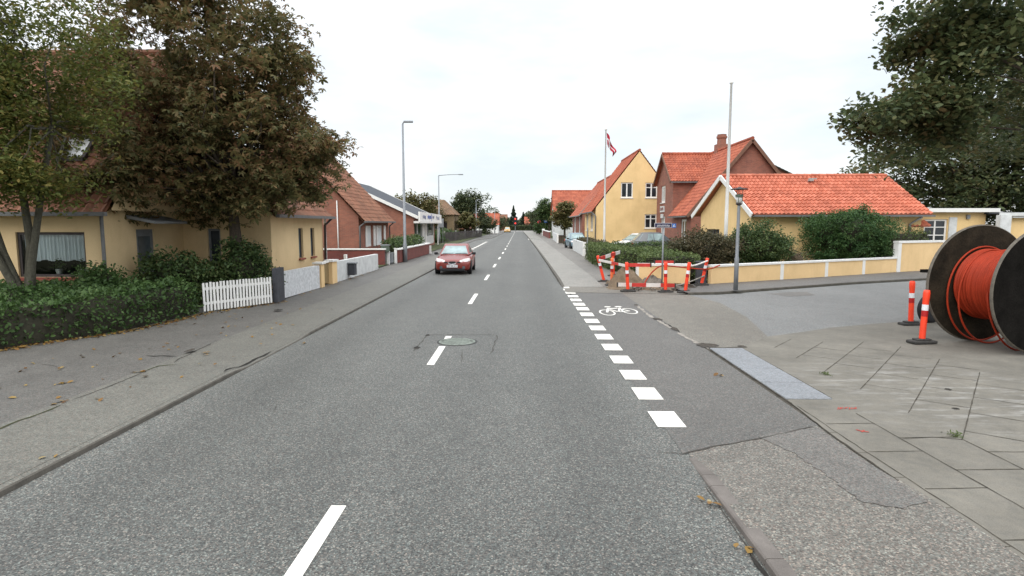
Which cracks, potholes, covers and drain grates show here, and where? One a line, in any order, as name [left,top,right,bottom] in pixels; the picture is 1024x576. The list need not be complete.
manhole cover [437,338,477,346]
crack [0,400,65,429]
crack [143,344,210,372]
crack [224,351,271,371]
